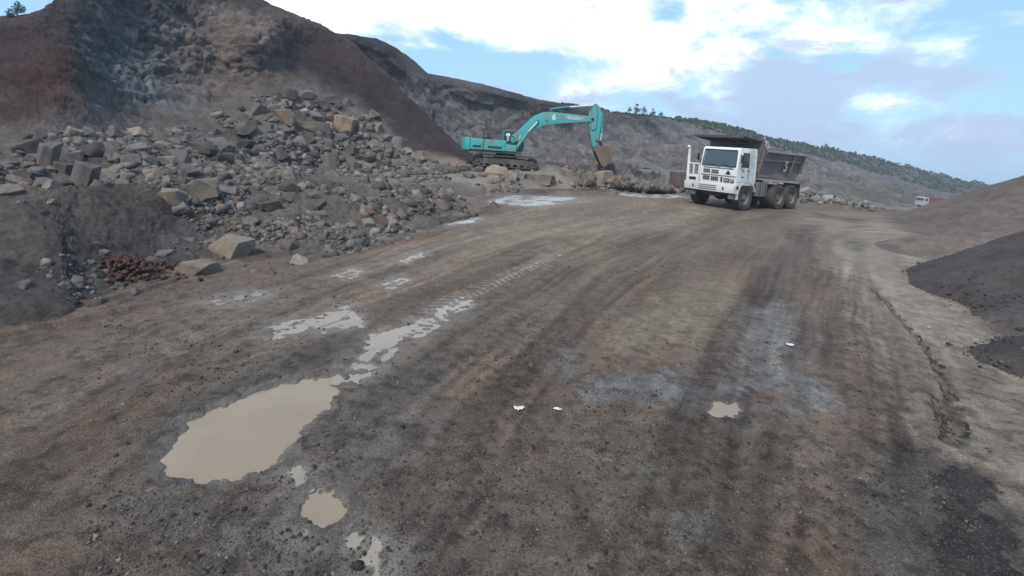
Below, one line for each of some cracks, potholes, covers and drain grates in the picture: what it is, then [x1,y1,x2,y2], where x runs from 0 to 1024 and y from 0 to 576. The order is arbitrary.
pothole [278,475,368,539]
pothole [124,366,362,501]
pothole [694,396,761,428]
